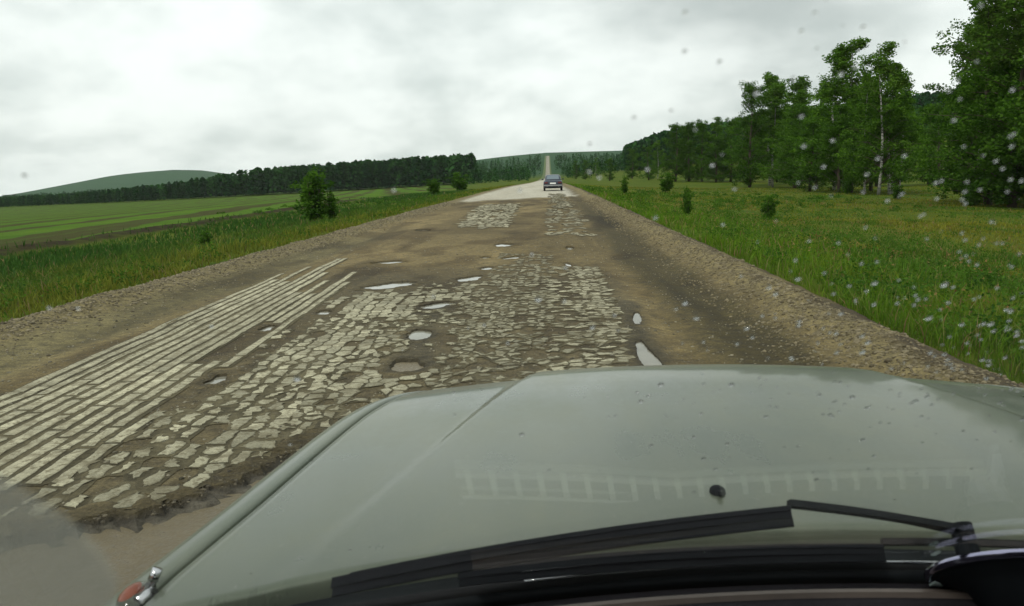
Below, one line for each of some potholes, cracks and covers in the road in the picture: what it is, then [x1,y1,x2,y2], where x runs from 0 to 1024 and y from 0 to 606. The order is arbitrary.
pothole [186,370,244,389]
pothole [374,355,441,376]
pothole [246,323,291,334]
pothole [394,327,445,343]
pothole [621,337,677,366]
pothole [621,310,654,327]
pothole [447,274,490,283]
pothole [352,280,426,291]
pothole [412,300,463,311]
